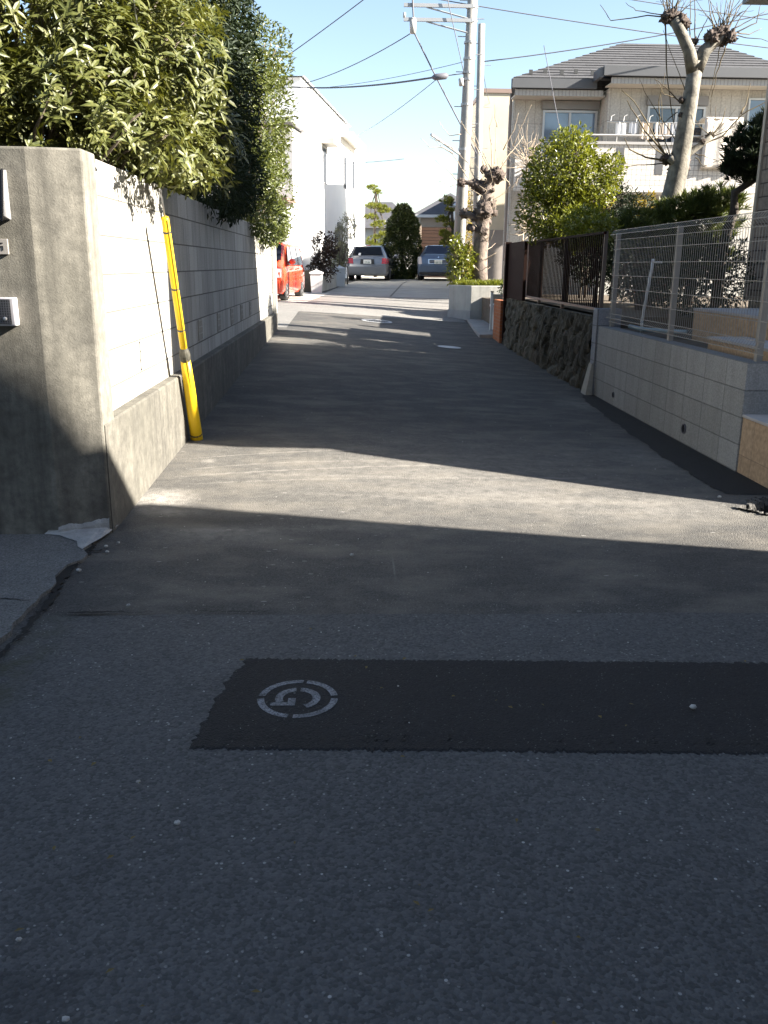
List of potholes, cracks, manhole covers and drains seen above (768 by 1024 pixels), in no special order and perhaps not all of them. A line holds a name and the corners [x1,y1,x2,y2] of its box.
crack [0,542,152,658]
